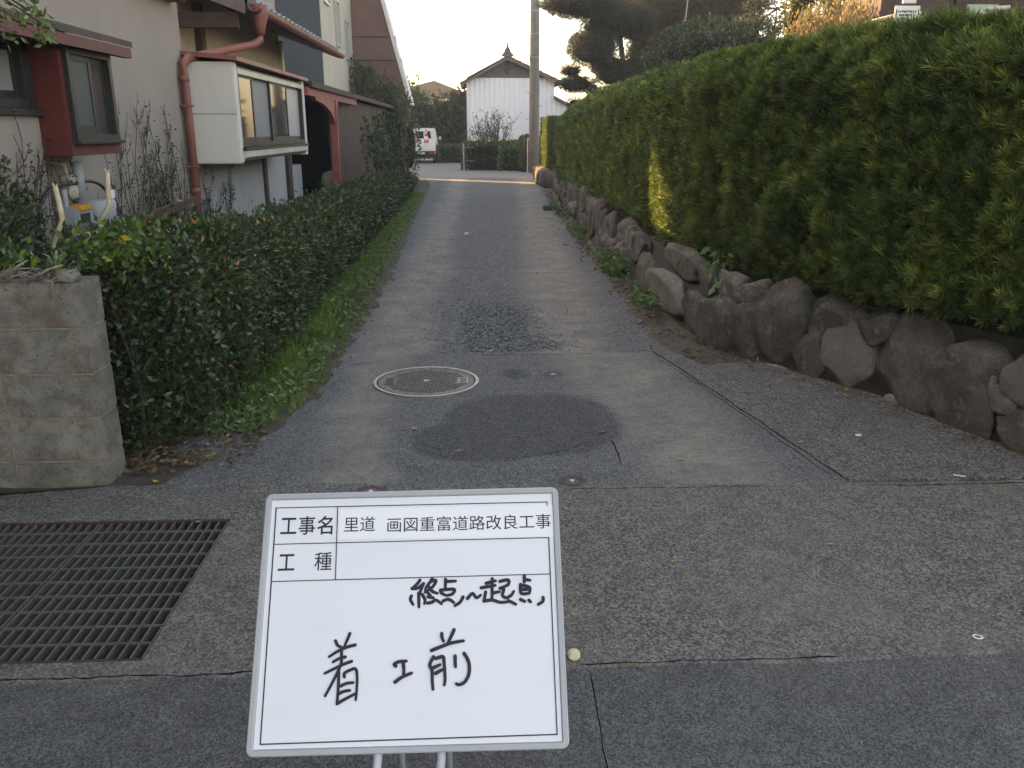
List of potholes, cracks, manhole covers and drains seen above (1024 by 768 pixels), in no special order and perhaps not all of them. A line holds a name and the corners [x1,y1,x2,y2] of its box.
manhole cover [373,366,479,398]
drain grate [0,522,102,632]
